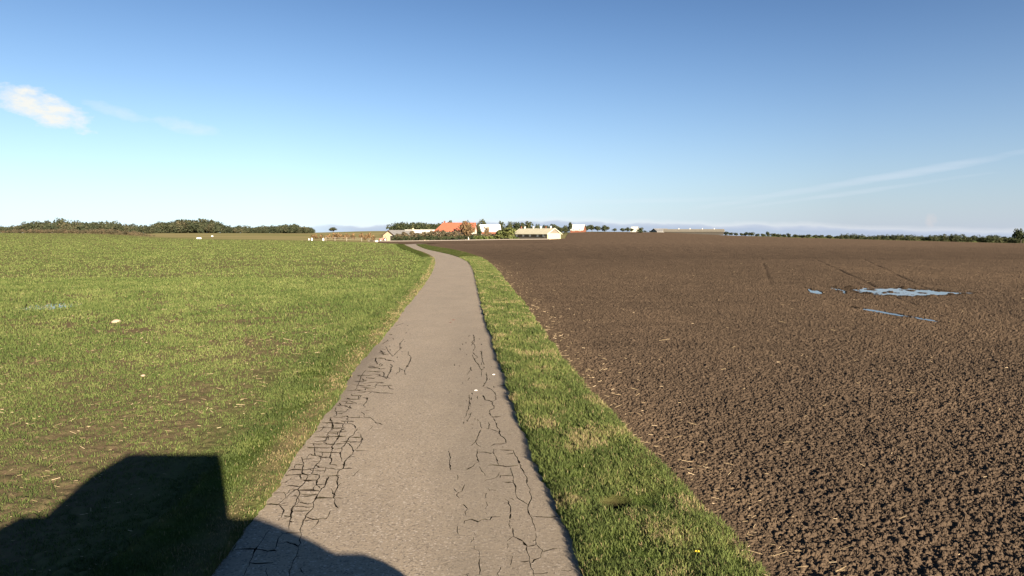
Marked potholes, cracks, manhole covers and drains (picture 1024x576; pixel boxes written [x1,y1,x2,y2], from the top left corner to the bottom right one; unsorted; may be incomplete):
crack [244,323,408,576]
crack [449,335,573,576]
